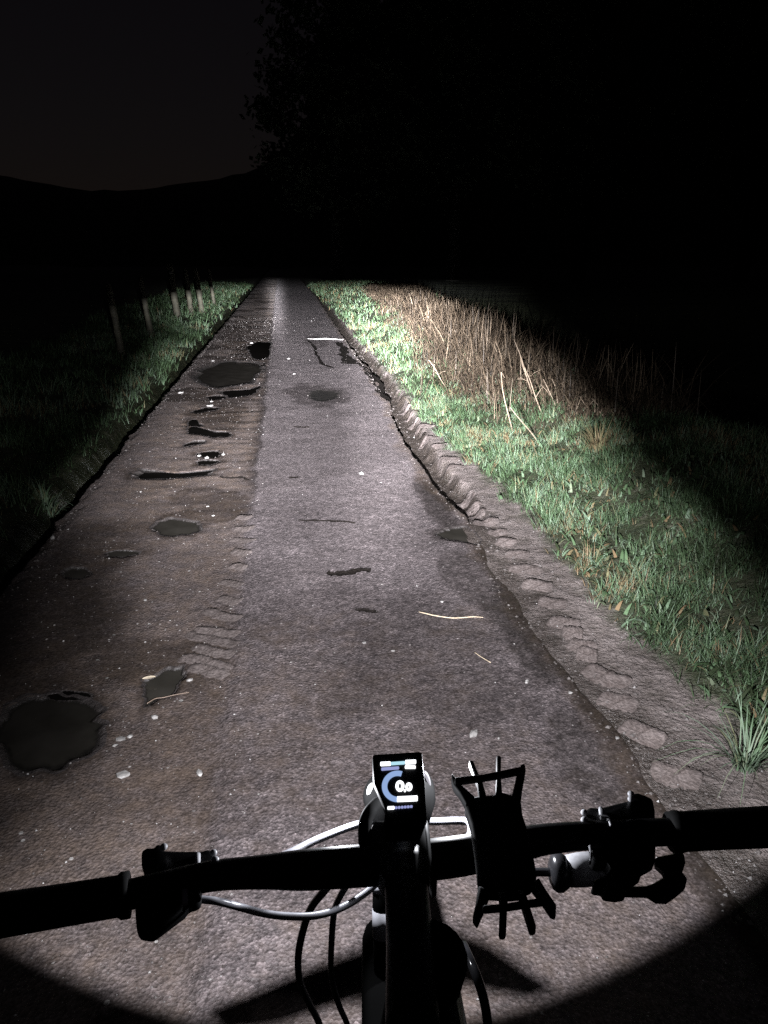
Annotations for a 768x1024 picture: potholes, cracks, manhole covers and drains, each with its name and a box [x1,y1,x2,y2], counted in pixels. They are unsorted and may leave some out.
pothole [190,360,268,389]
pothole [104,549,142,558]
pothole [0,689,110,777]
pothole [195,450,222,458]
pothole [141,664,188,708]
pothole [149,516,204,537]
crack [325,568,371,576]
pothole [128,468,218,480]
crack [308,341,391,403]
pothole [215,384,263,398]
pothole [186,426,234,438]
